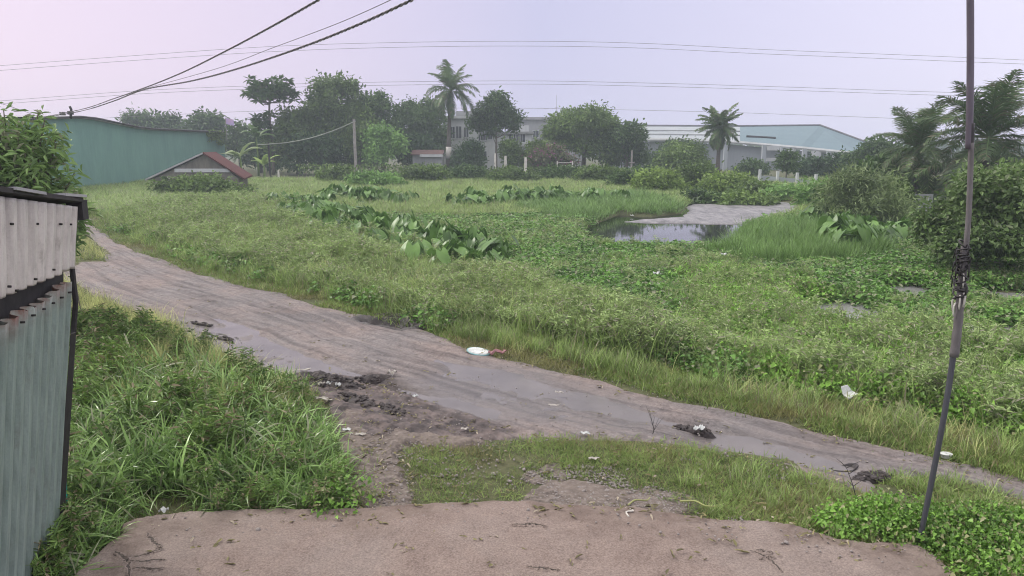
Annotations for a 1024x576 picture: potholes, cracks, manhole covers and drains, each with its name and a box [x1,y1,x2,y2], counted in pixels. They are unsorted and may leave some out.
crack [113,532,166,576]
